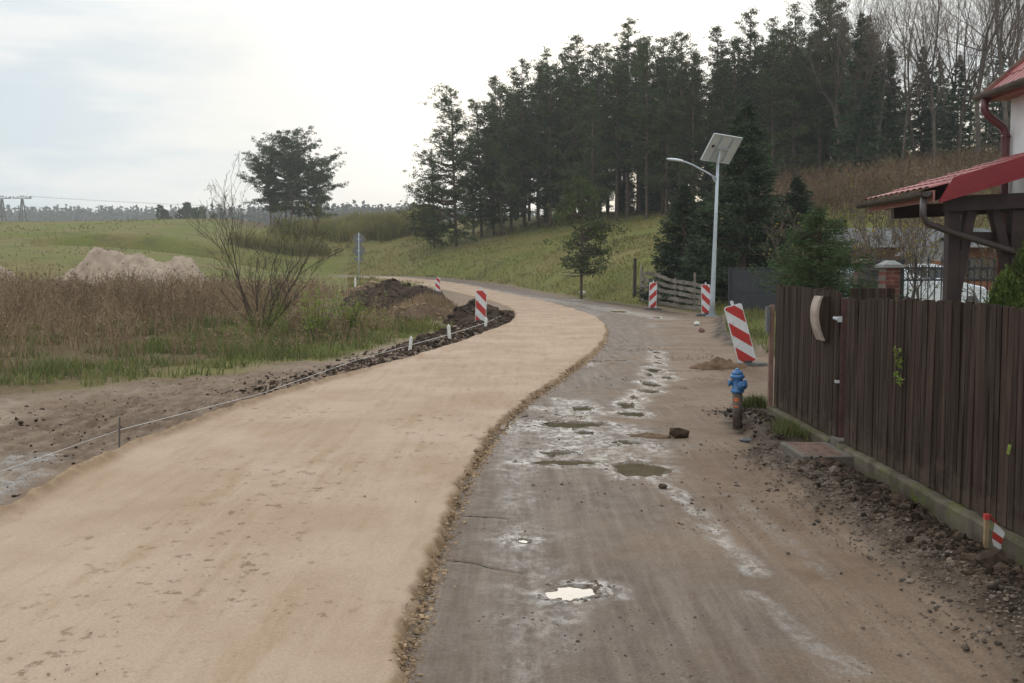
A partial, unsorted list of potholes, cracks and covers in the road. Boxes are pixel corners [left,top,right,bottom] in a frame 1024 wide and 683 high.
crack [454,514,510,522]
pothole [529,420,622,429]
pothole [523,459,603,467]
crack [436,558,527,577]
pothole [606,459,679,479]
pothole [539,583,609,602]
